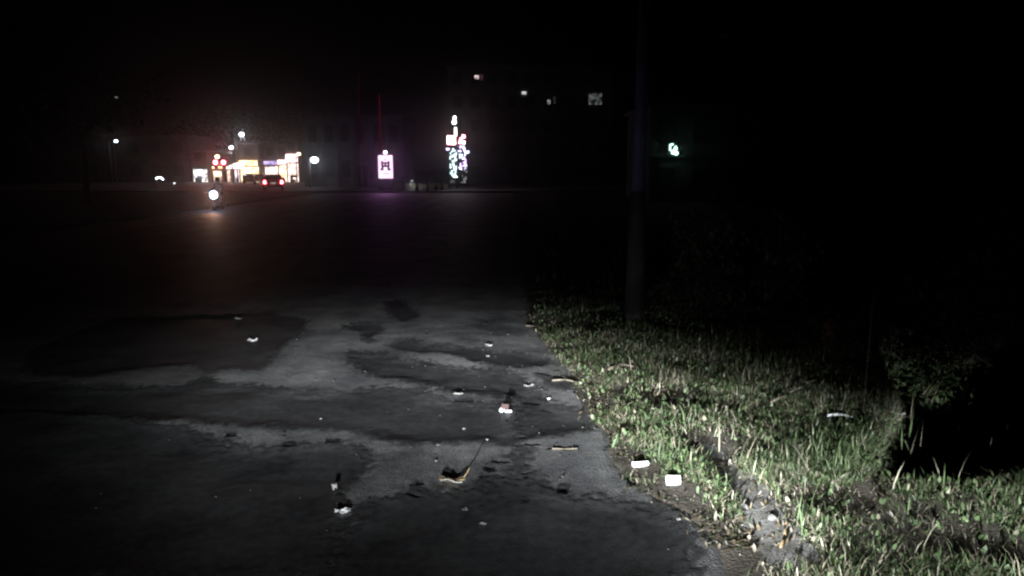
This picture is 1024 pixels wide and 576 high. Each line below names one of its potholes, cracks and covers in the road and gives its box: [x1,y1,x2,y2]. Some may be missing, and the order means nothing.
pothole [344,349,600,441]
pothole [0,377,530,446]
pothole [324,467,708,576]
pothole [0,406,378,576]
